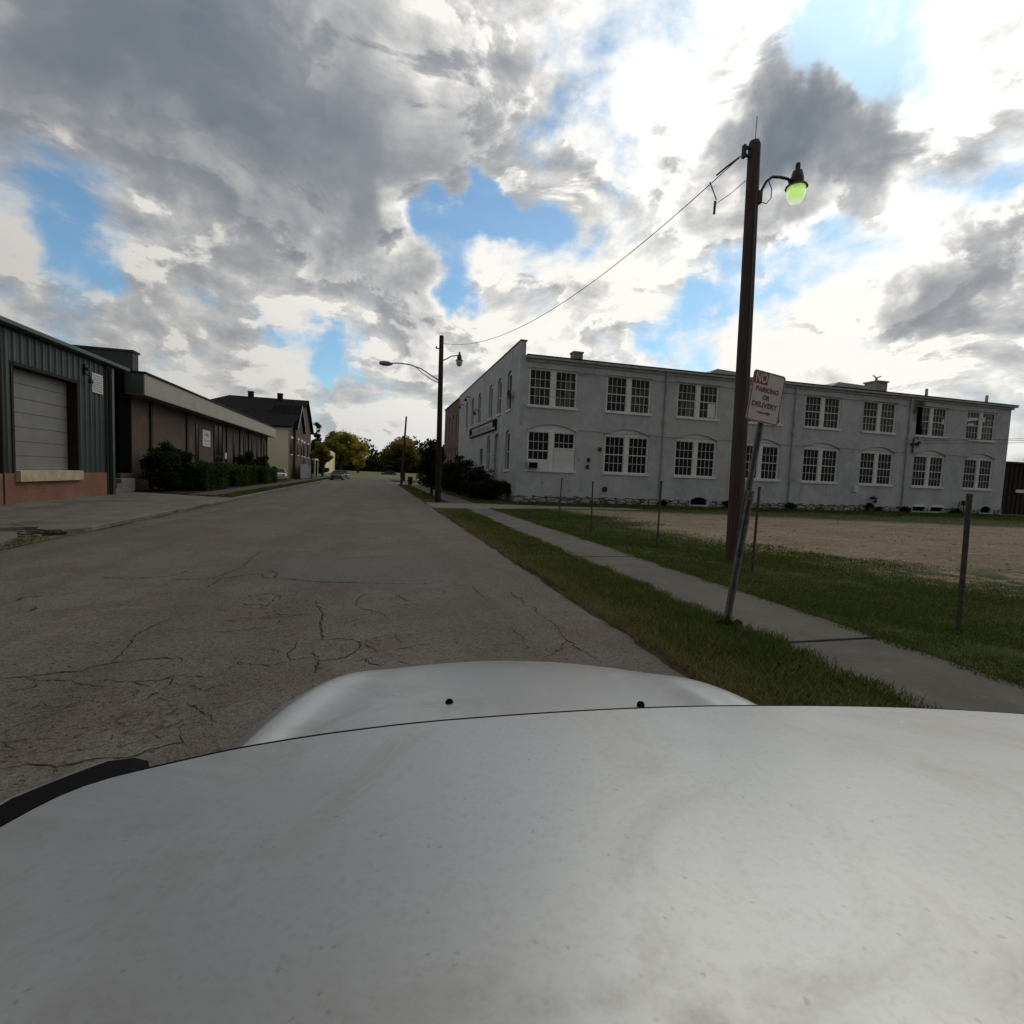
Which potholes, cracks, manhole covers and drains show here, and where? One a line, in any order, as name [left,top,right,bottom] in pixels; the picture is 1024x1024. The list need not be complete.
crack [4,619,247,768]
crack [511,592,596,659]
crack [105,551,432,673]
